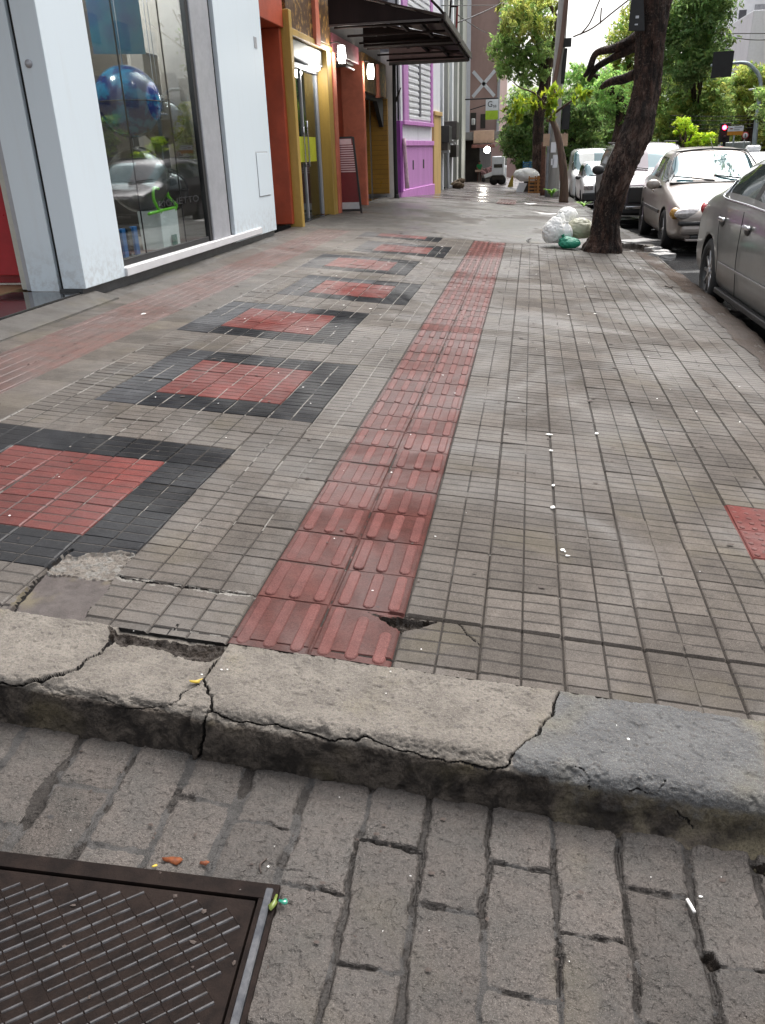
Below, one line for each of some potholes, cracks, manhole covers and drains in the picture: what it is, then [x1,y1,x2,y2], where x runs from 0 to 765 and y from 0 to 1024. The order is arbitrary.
manhole cover [0,851,281,1024]
crack [214,693,560,771]
crack [0,637,114,687]
crack [100,681,205,711]
